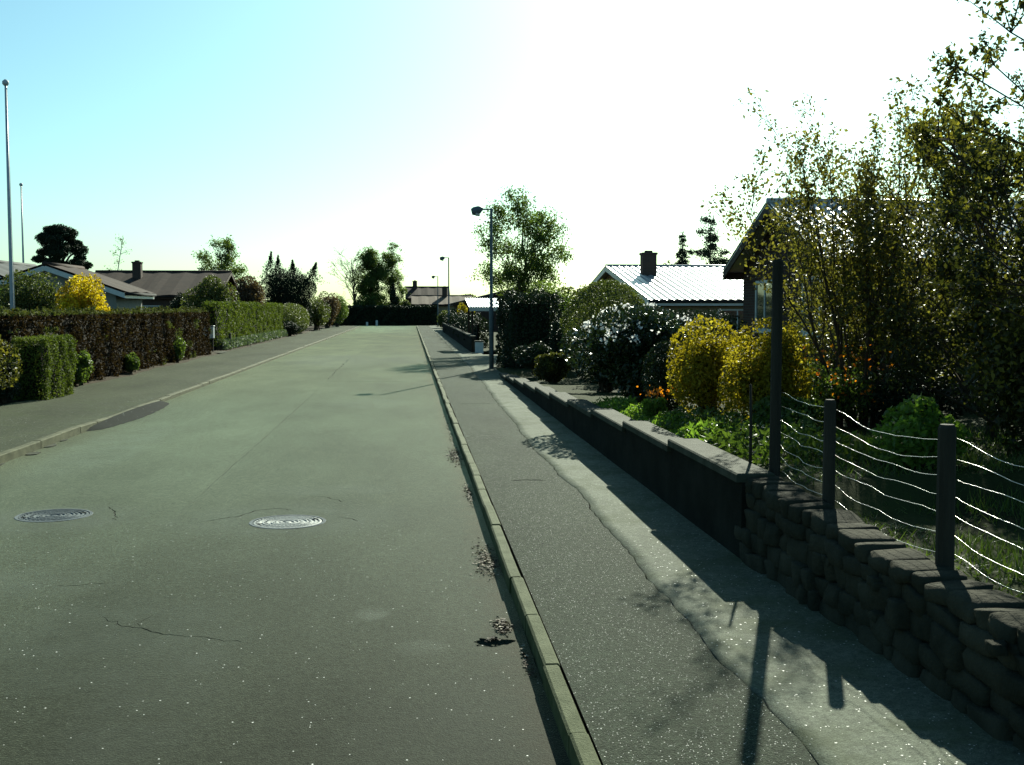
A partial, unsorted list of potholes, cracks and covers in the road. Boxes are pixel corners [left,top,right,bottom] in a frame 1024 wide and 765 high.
manhole cover [249,515,326,529]
manhole cover [14,509,93,522]
crack [104,614,243,643]
